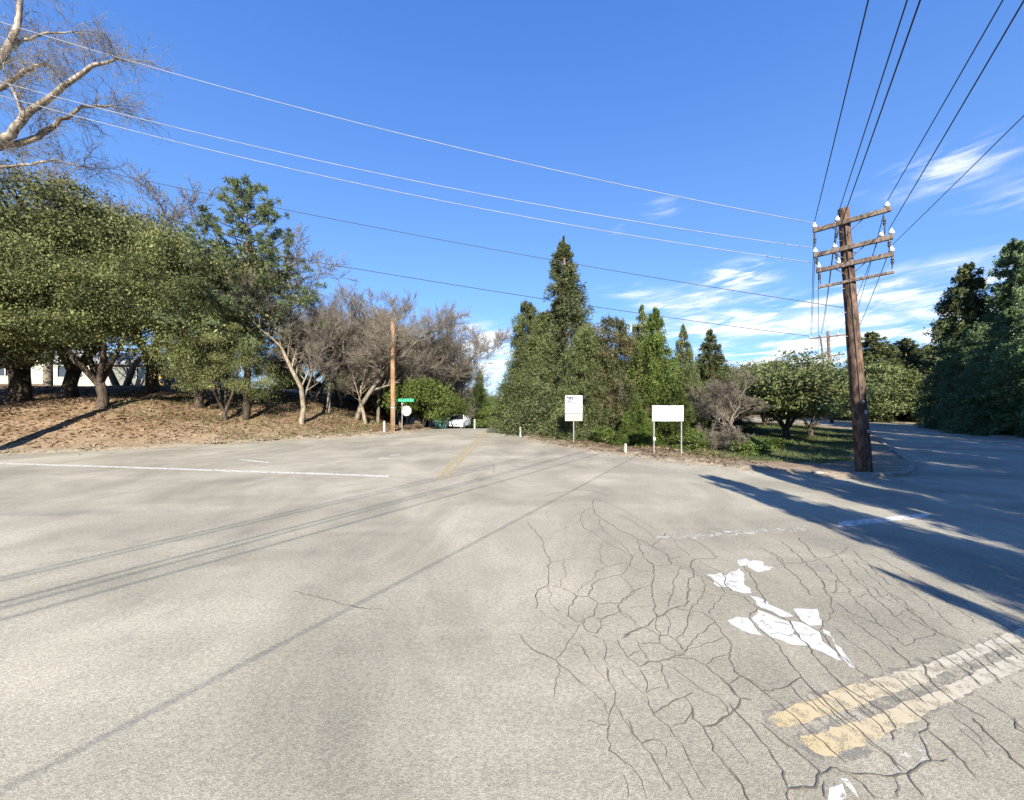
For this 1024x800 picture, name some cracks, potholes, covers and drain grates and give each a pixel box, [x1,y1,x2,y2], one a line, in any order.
crack [520,490,1024,800]
crack [294,591,378,610]
